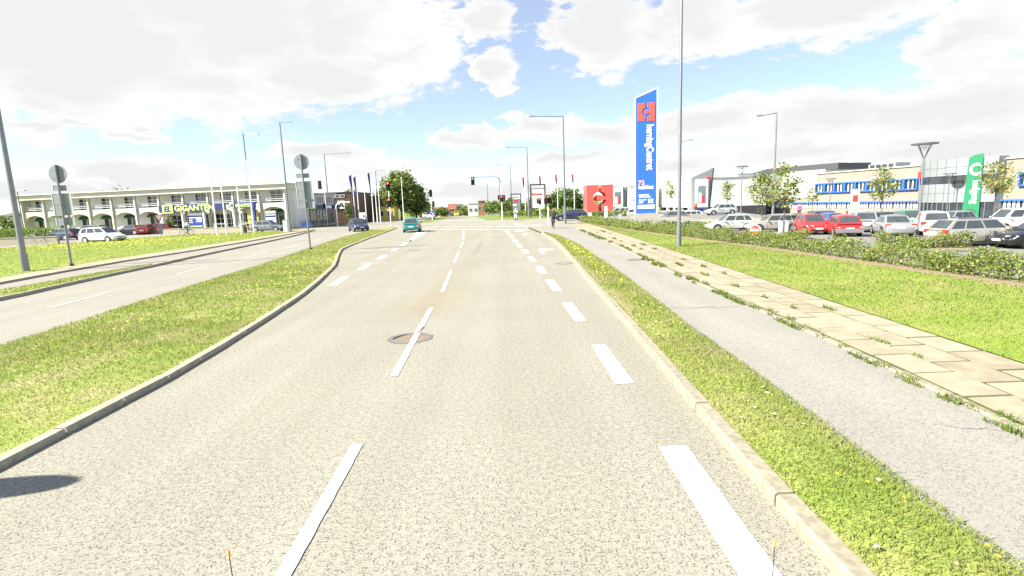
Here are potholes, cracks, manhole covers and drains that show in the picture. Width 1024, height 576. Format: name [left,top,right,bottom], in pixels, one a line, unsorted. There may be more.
manhole cover [387,333,433,344]
